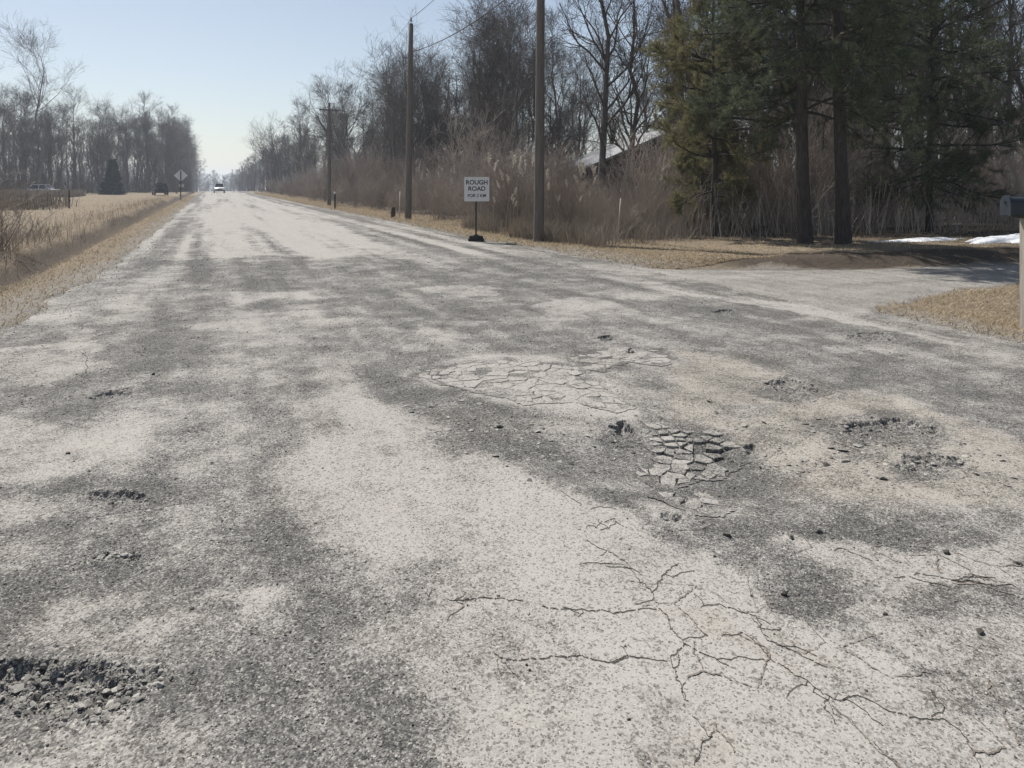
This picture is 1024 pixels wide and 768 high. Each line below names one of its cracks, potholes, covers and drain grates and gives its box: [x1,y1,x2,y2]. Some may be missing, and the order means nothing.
pothole [62,382,157,407]
pothole [822,413,966,446]
pothole [747,374,835,402]
pothole [0,638,203,750]
pothole [873,446,981,483]
crack [407,347,754,517]
crack [425,539,1021,768]
pothole [585,332,629,346]
